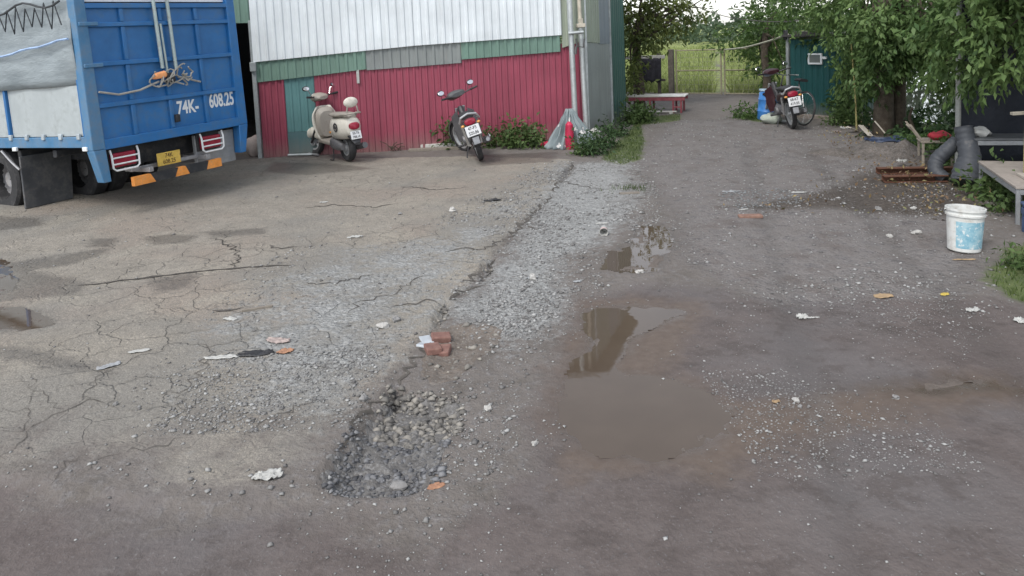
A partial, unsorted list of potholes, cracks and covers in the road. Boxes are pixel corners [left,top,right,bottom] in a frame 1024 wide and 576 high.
crack [210,238,241,267]
crack [0,369,116,459]
crack [307,161,590,312]
pothole [385,385,405,413]
pothole [320,390,467,499]
